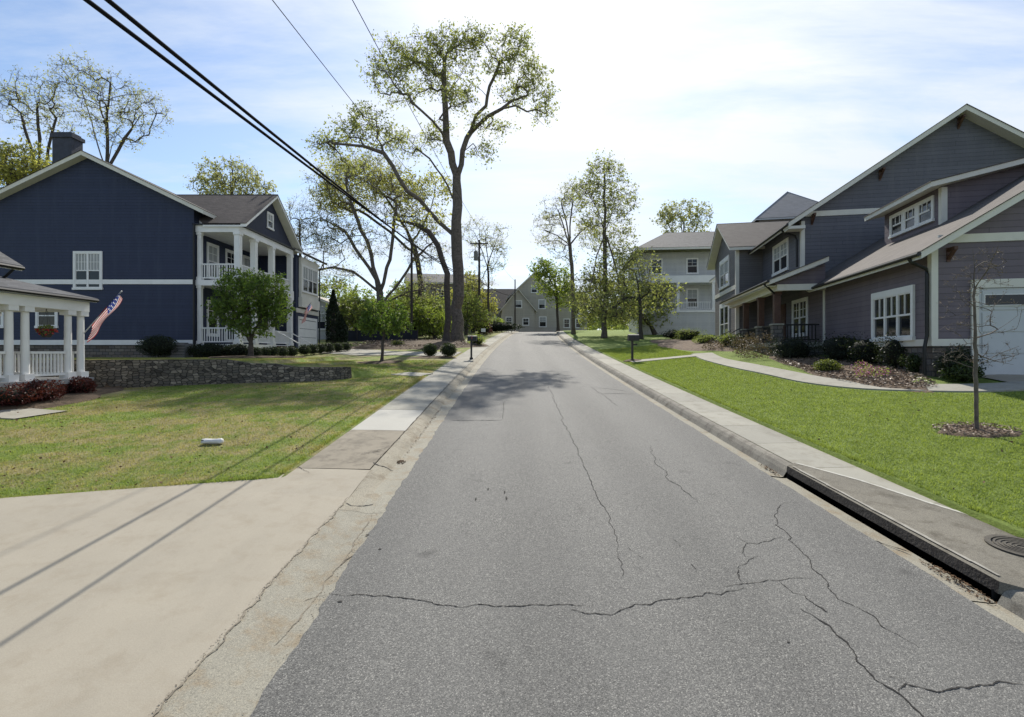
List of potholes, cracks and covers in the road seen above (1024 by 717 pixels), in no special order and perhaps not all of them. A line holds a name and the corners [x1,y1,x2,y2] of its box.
manhole cover [984,534,1024,557]
crack [274,501,1020,717]
